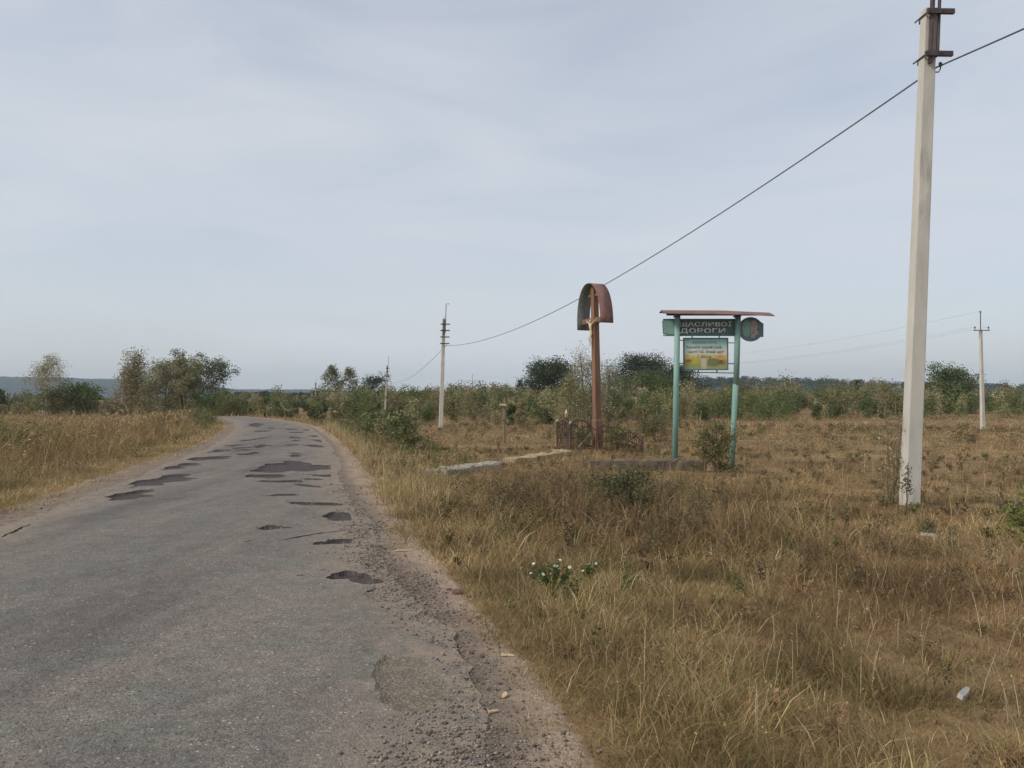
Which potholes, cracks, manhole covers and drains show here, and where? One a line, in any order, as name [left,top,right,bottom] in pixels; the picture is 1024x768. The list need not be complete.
pothole [105,490,153,500]
pothole [325,570,384,584]
crack [285,529,353,540]
pothole [249,461,331,473]
pothole [128,474,198,488]
pothole [322,512,352,521]
